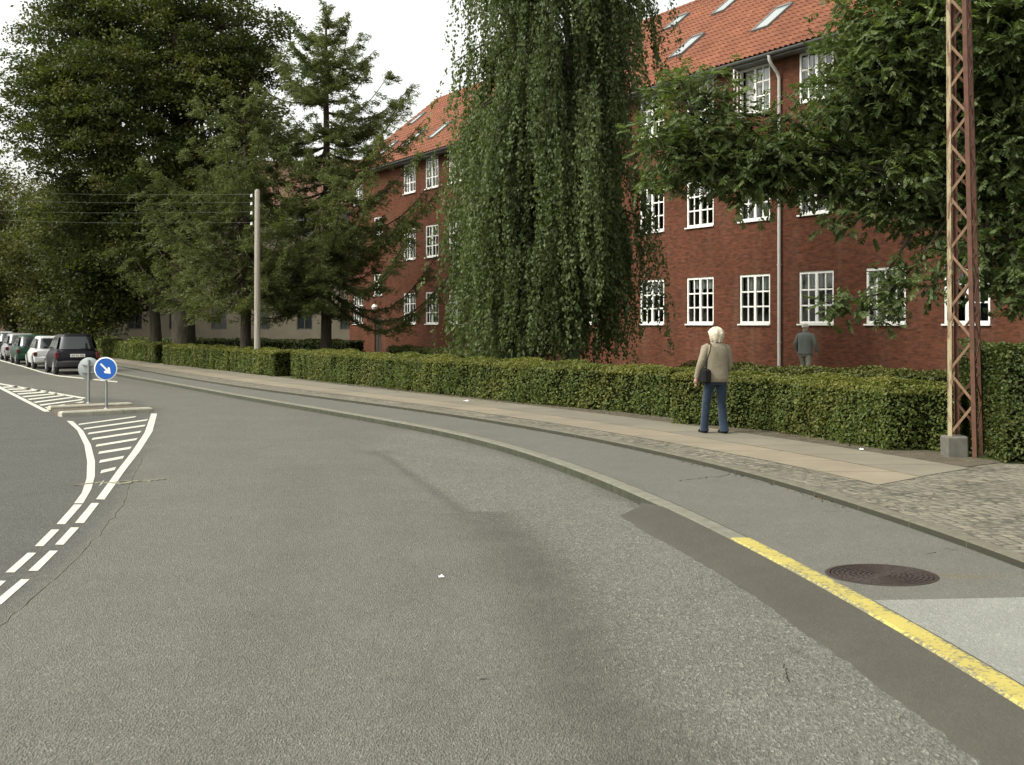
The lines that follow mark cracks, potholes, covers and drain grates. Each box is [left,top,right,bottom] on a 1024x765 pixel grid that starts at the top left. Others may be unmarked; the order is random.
manhole cover [825,564,940,586]
